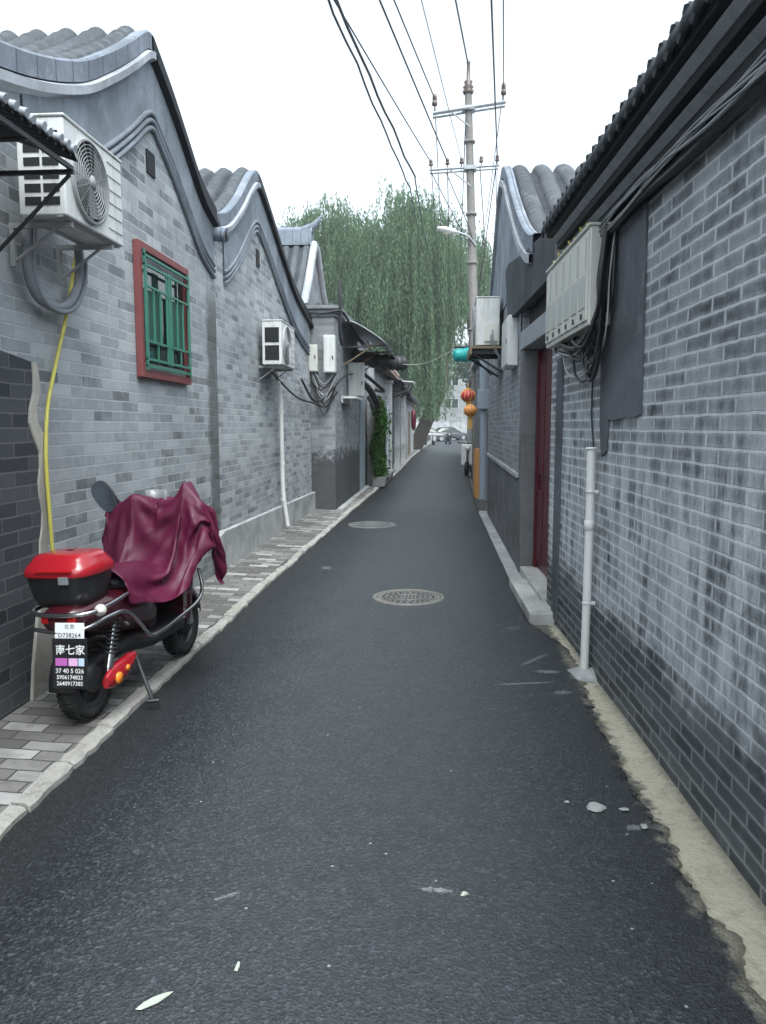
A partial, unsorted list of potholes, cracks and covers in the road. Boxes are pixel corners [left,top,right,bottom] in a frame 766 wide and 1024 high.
manhole cover [372,589,445,605]
